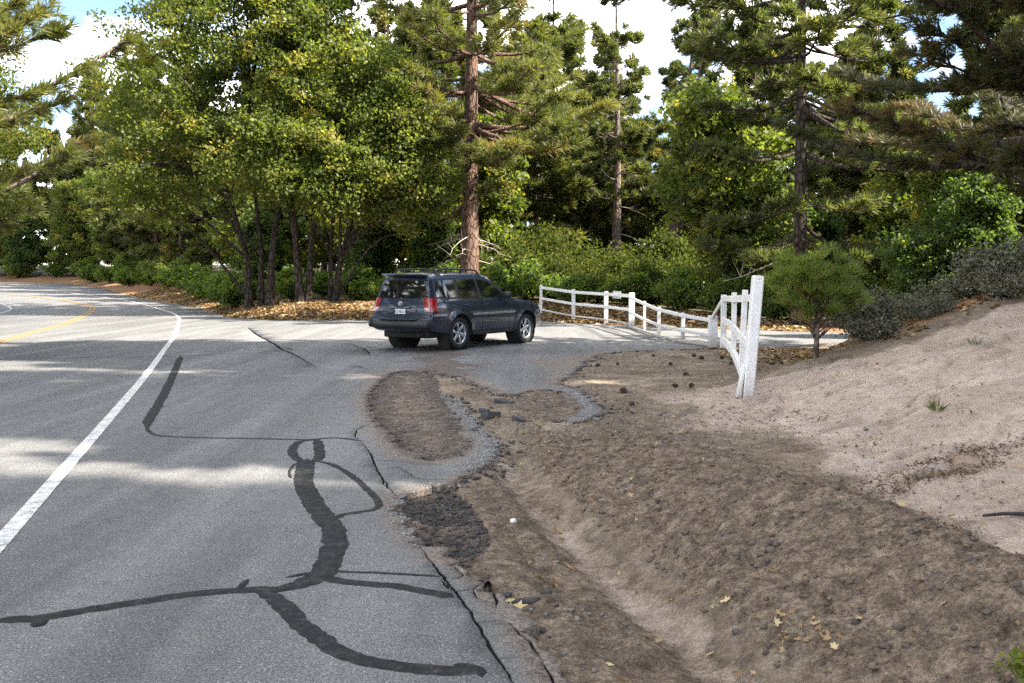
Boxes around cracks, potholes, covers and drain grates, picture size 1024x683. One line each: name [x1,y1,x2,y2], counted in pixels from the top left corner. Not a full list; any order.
crack [249,329,314,366]
pothole [394,489,499,569]
crack [354,425,412,496]
pothole [508,391,581,421]
pothole [369,372,472,461]
crack [419,544,554,683]
